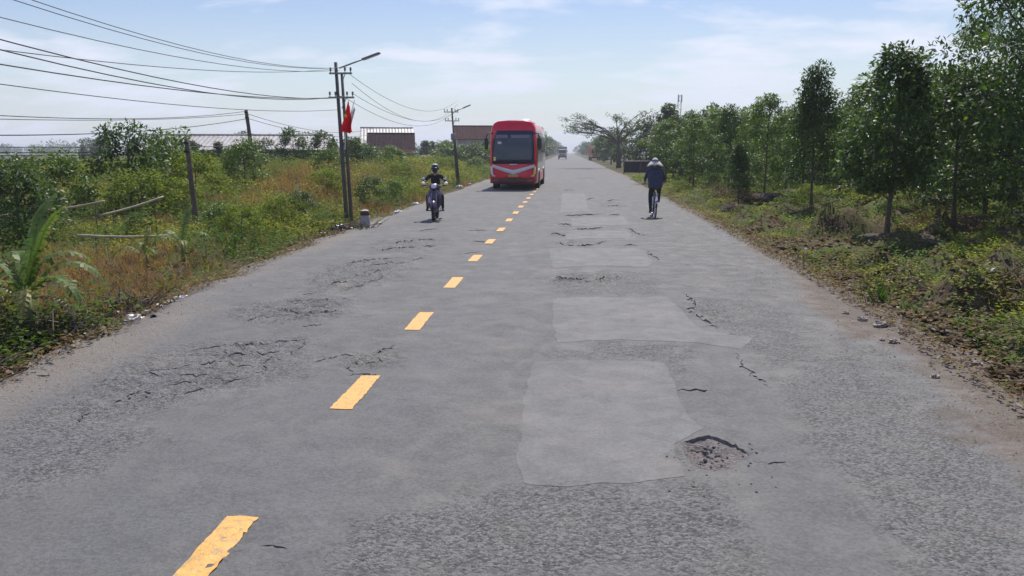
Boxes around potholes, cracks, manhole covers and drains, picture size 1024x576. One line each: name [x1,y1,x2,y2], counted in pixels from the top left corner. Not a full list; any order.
crack [684,293,717,329]
crack [735,353,768,387]
pothole [665,435,777,497]
crack [115,229,434,403]
crack [551,199,659,260]
